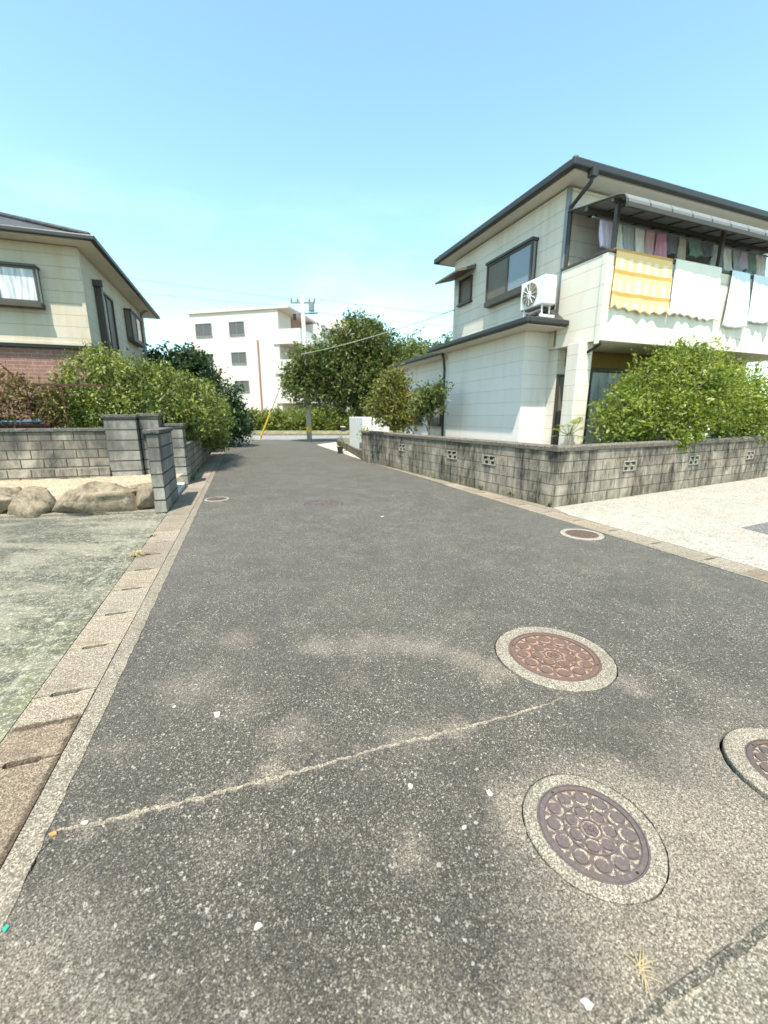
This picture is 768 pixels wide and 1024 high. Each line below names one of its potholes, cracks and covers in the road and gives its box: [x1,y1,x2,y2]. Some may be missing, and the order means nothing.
manhole cover [560,529,605,541]
manhole cover [522,775,668,906]
manhole cover [721,728,768,801]
manhole cover [495,627,617,693]
crack [28,696,563,875]
manhole cover [304,500,342,508]
